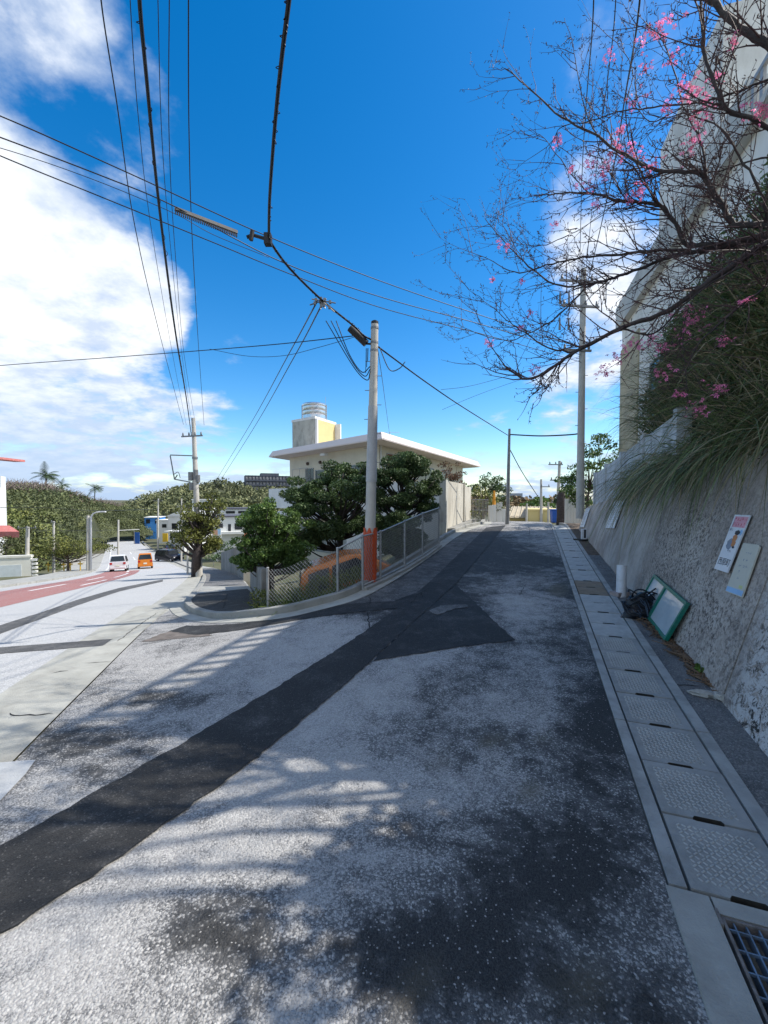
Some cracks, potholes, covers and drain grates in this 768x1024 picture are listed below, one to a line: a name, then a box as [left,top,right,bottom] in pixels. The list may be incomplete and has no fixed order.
drain grate [714,907,768,1024]
